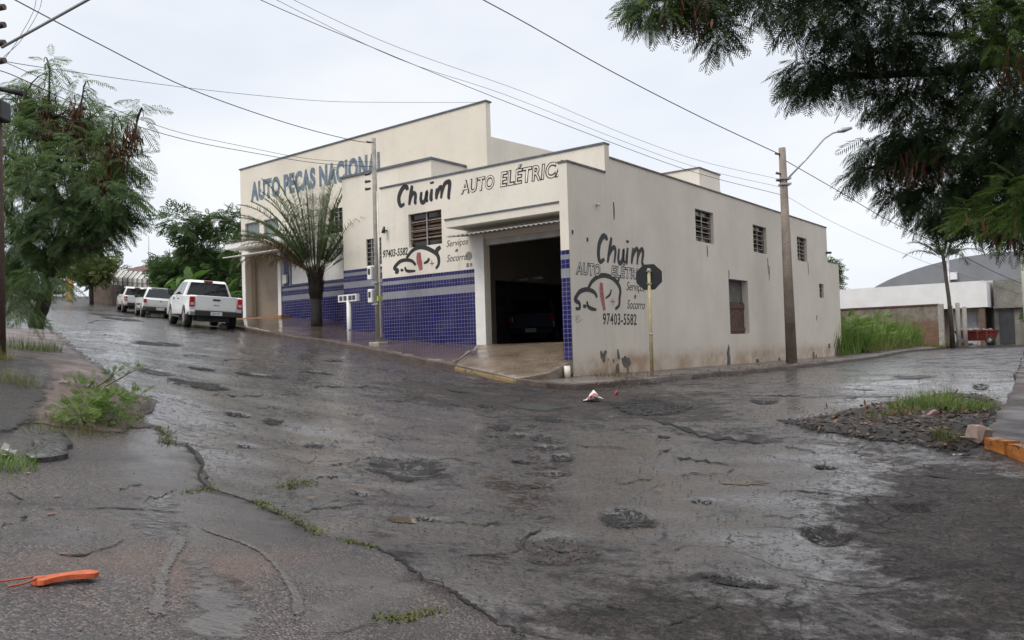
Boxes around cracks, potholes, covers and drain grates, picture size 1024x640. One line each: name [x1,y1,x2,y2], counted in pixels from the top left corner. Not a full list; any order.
crack [619,420,764,488]
pothole [346,456,450,482]
pothole [597,508,659,529]
pothole [795,522,858,546]
pothole [514,536,599,566]
pothole [696,573,779,590]
crack [120,442,526,639]
pothole [606,397,694,416]
pothole [167,377,230,391]
